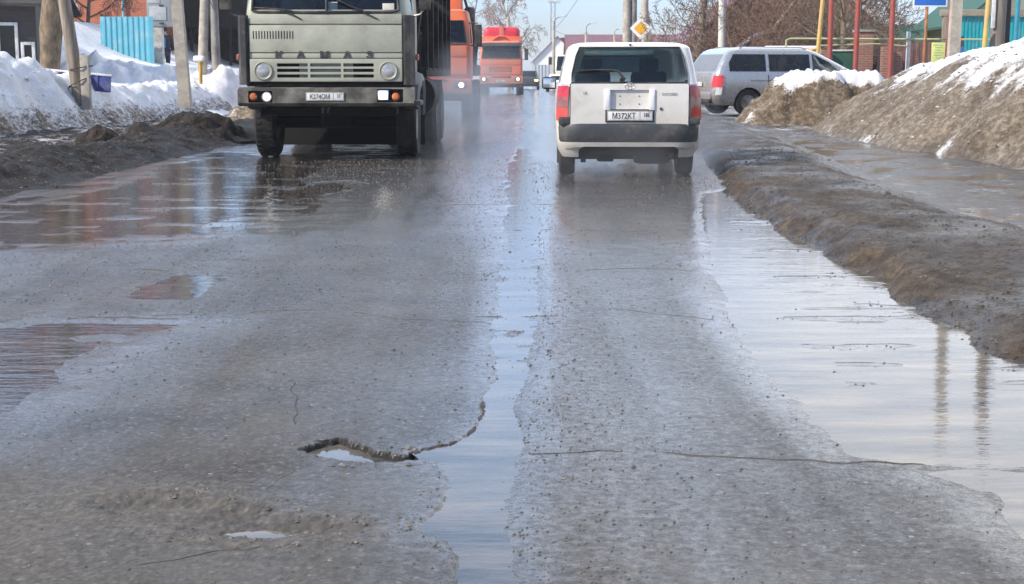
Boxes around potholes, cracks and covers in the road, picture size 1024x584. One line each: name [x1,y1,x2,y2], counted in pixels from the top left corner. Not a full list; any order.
crack [612,308,713,320]
pothole [283,434,491,468]
crack [528,450,925,465]
crack [139,547,260,565]
crack [220,383,306,488]
